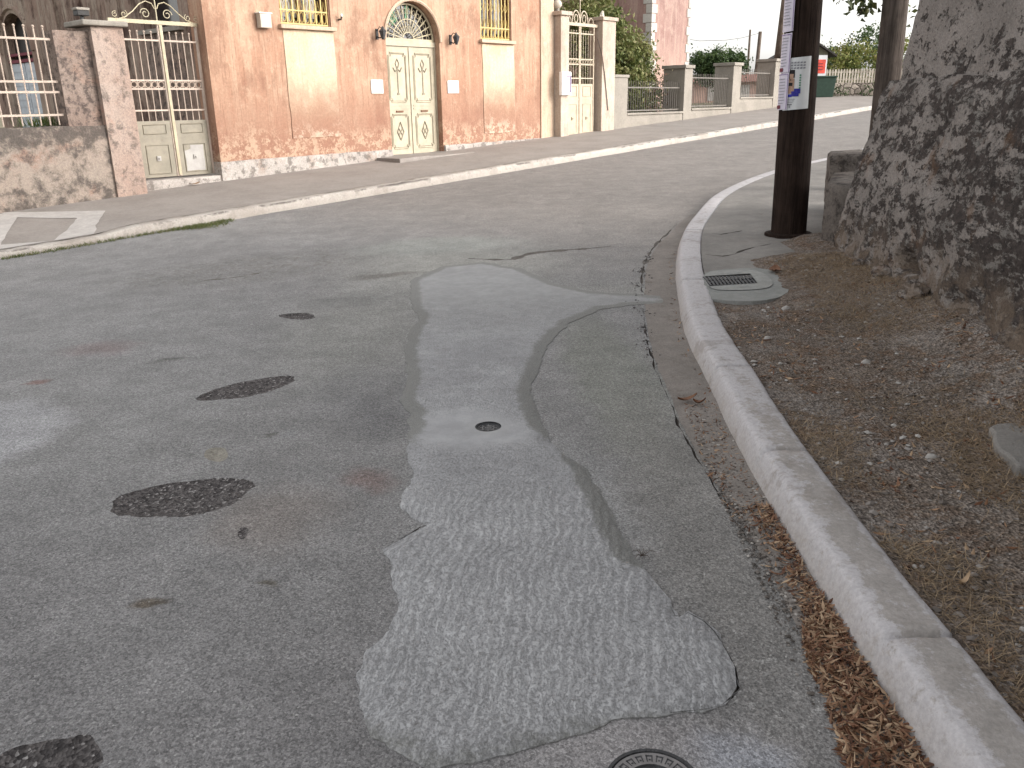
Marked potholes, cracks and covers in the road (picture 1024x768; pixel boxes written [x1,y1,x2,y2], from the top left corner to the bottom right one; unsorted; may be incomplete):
manhole cover [475,422,501,432]
manhole cover [608,748,693,768]
pothole [0,735,103,768]
crack [640,225,676,291]
pothole [195,376,295,401]
drain grate [702,268,789,305]
crack [643,312,746,537]
pothole [110,478,256,517]
crack [469,246,611,261]
crack [707,231,769,257]
